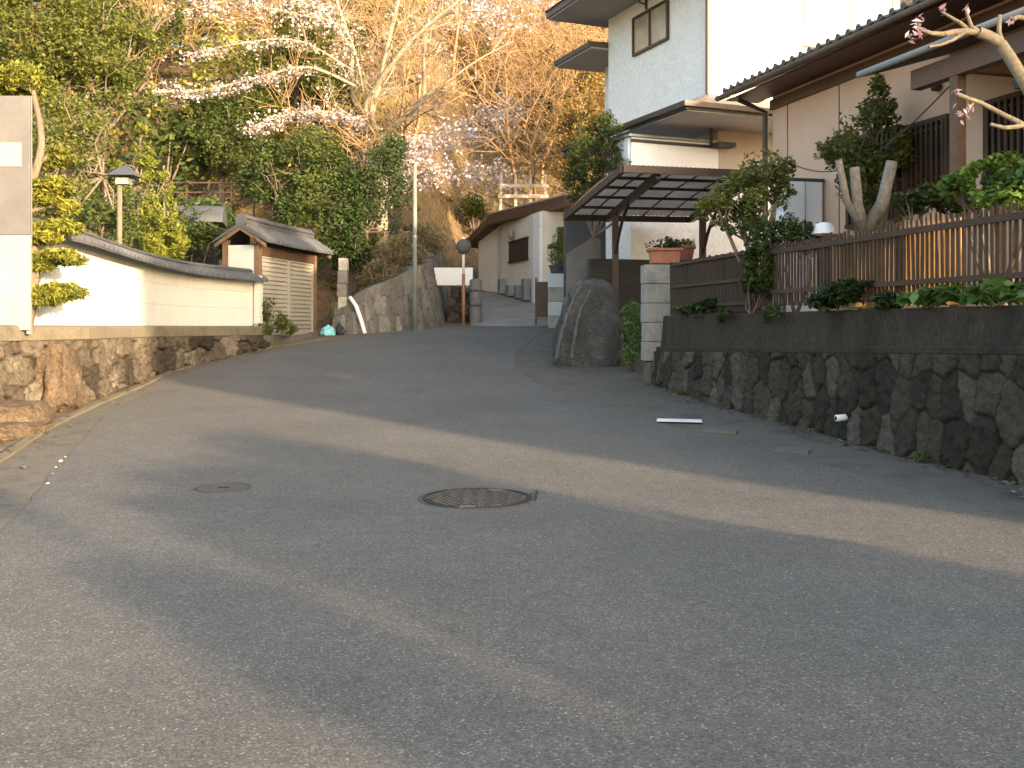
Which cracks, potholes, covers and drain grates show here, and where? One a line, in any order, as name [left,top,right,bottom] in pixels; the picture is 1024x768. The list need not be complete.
utility cover [194,482,252,493]
manhole cover [418,487,535,509]
